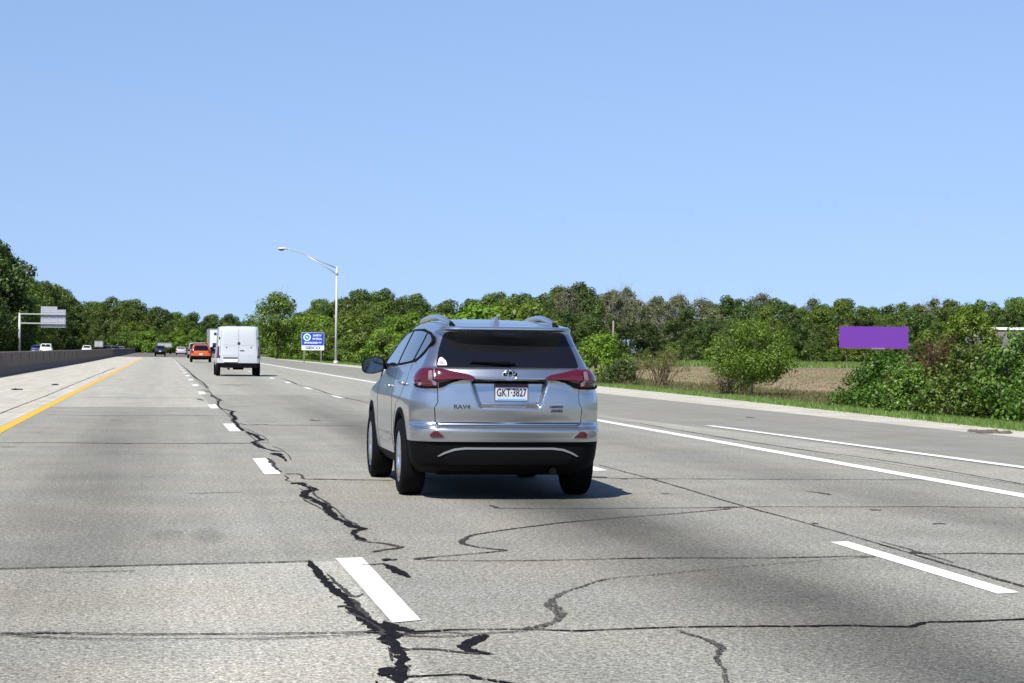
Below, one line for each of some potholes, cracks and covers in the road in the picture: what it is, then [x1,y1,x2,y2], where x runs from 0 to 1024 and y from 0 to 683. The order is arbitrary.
crack [0,631,385,639]
crack [674,629,729,682]
